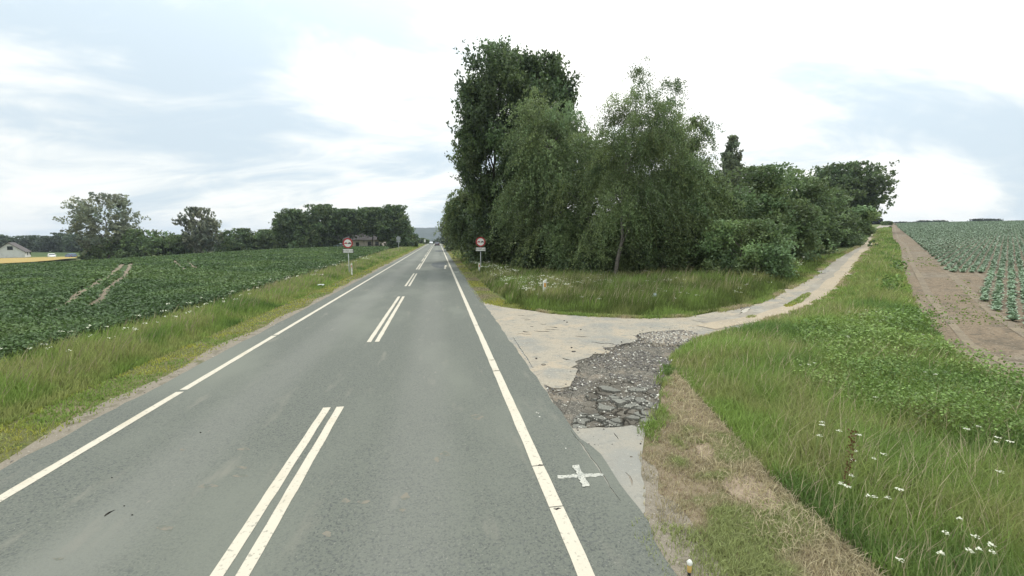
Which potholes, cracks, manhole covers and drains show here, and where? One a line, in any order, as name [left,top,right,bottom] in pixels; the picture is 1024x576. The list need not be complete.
pothole [546,331,697,427]
crack [572,377,658,438]
